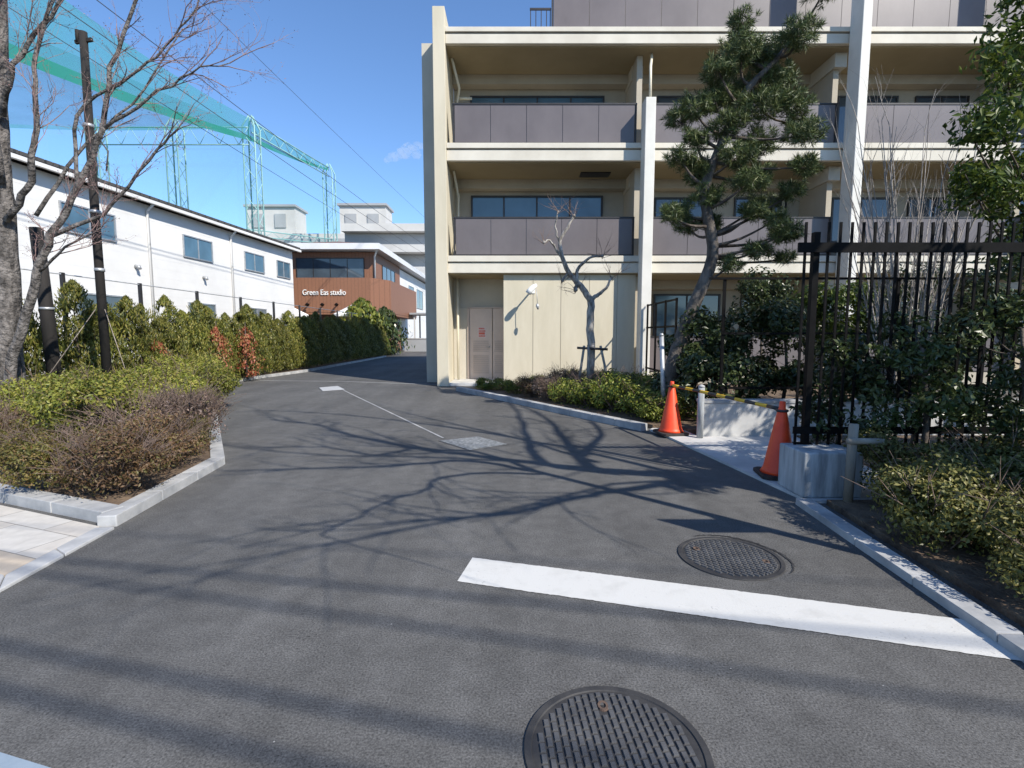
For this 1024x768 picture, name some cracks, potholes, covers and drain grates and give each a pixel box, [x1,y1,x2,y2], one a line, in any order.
manhole cover [678,537,786,581]
manhole cover [524,686,715,768]
